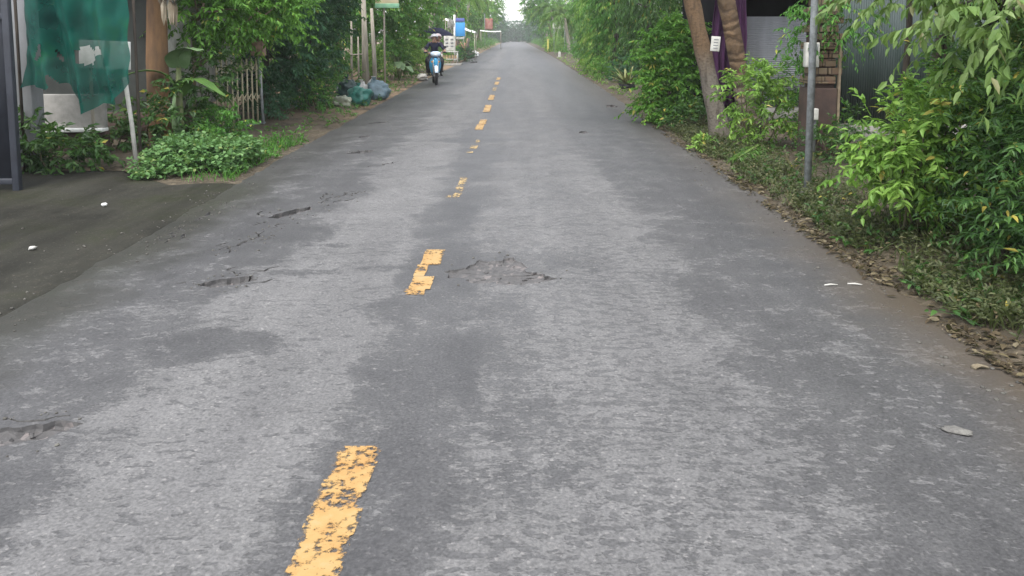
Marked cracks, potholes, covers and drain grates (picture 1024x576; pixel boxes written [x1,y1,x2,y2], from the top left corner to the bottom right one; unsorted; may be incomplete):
pothole [269,207,312,218]
pothole [0,420,84,447]
crack [176,191,355,284]
pothole [198,276,256,288]
pothole [445,257,558,285]
